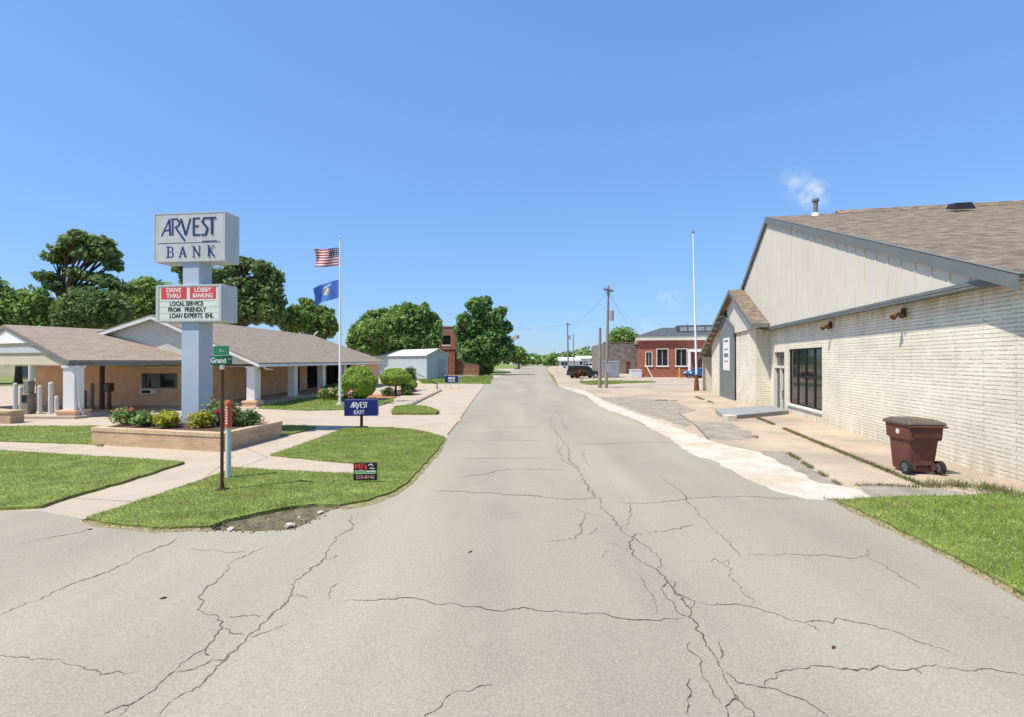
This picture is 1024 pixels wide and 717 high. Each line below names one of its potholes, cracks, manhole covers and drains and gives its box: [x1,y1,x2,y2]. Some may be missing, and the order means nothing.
crack [7,539,242,612]
crack [4,655,130,675]
crack [104,513,355,716]
crack [328,404,1022,717]
